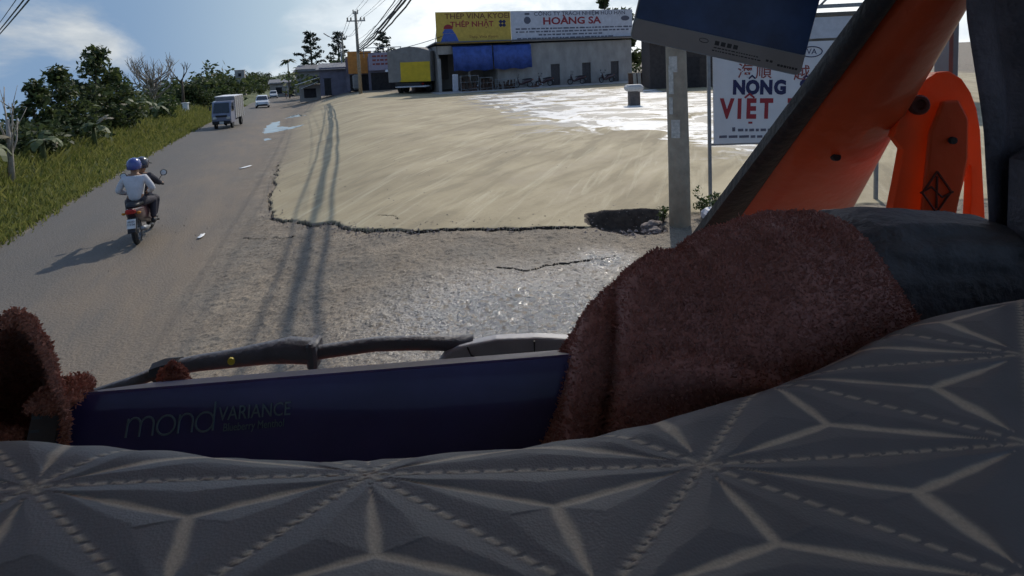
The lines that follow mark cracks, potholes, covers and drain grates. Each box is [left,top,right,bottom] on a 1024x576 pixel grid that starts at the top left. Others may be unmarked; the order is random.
pothole [584,208,668,237]
crack [243,162,591,240]
crack [497,255,615,272]
